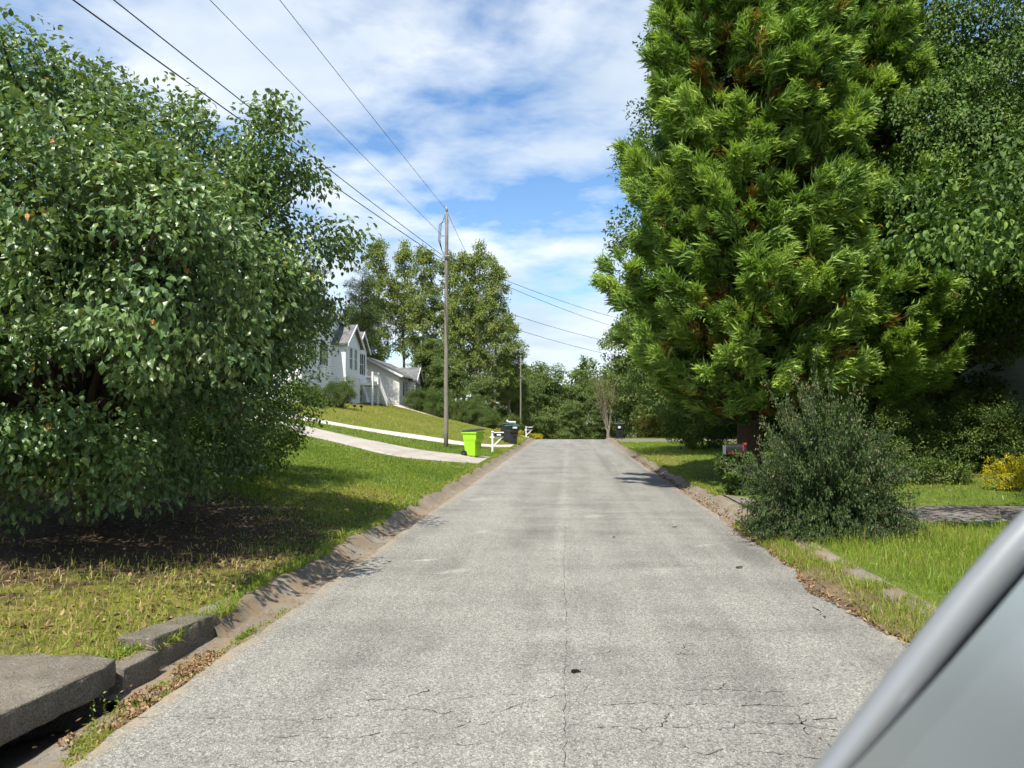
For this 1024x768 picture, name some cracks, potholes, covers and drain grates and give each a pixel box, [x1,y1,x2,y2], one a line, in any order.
crack [595,683,836,765]
crack [138,523,612,766]
